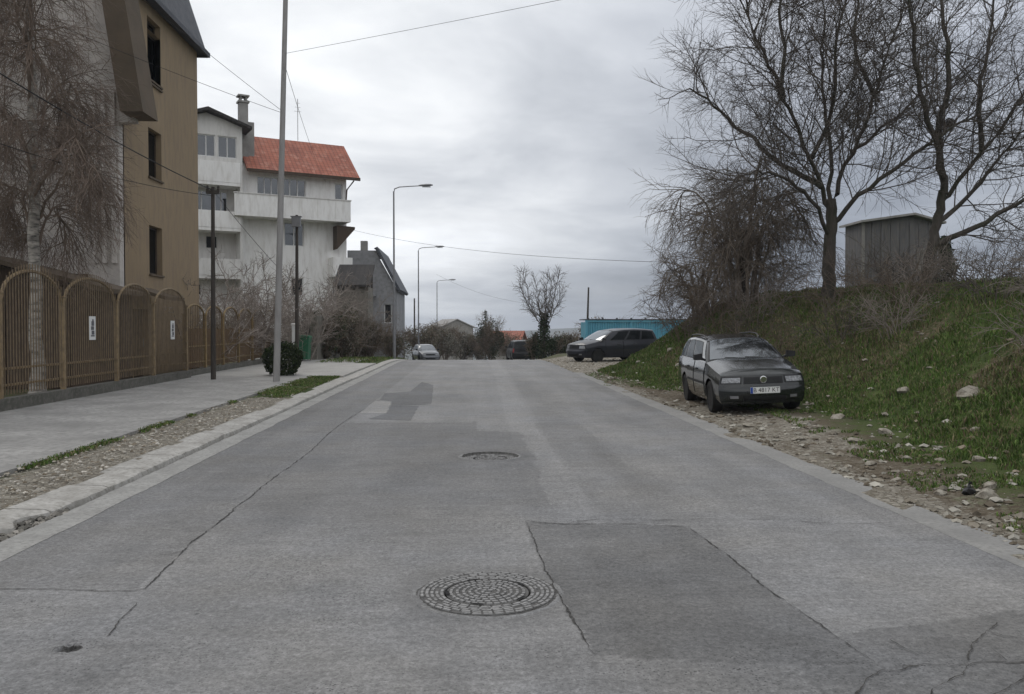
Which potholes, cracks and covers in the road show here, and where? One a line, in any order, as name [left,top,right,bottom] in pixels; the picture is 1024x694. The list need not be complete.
manhole cover [458,451,521,461]
manhole cover [411,570,564,619]
crack [528,519,1024,694]
pothole [44,644,90,655]
